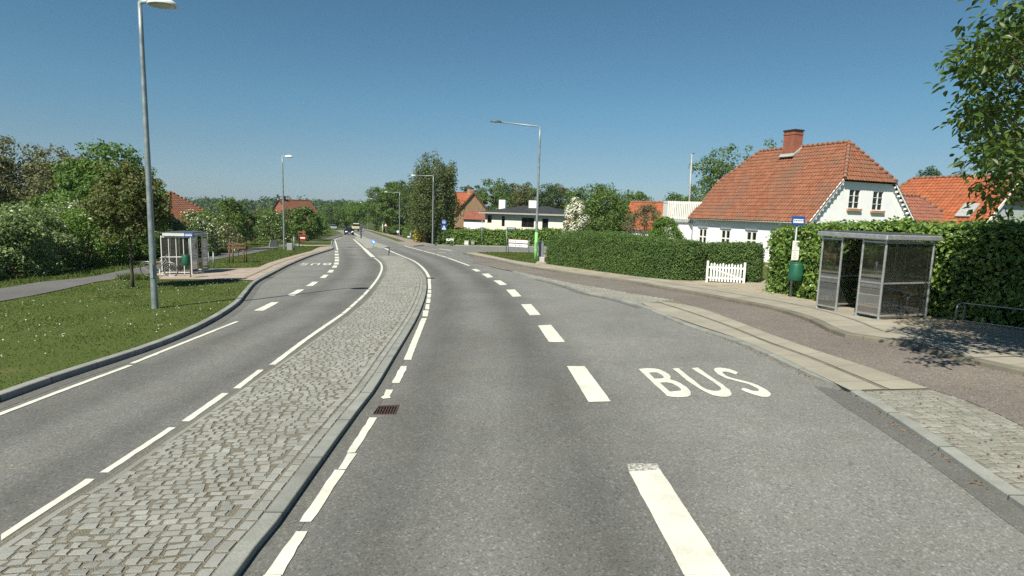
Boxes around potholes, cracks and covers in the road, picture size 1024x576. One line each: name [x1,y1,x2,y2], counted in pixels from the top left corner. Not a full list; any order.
drain grate [373,405,400,415]
